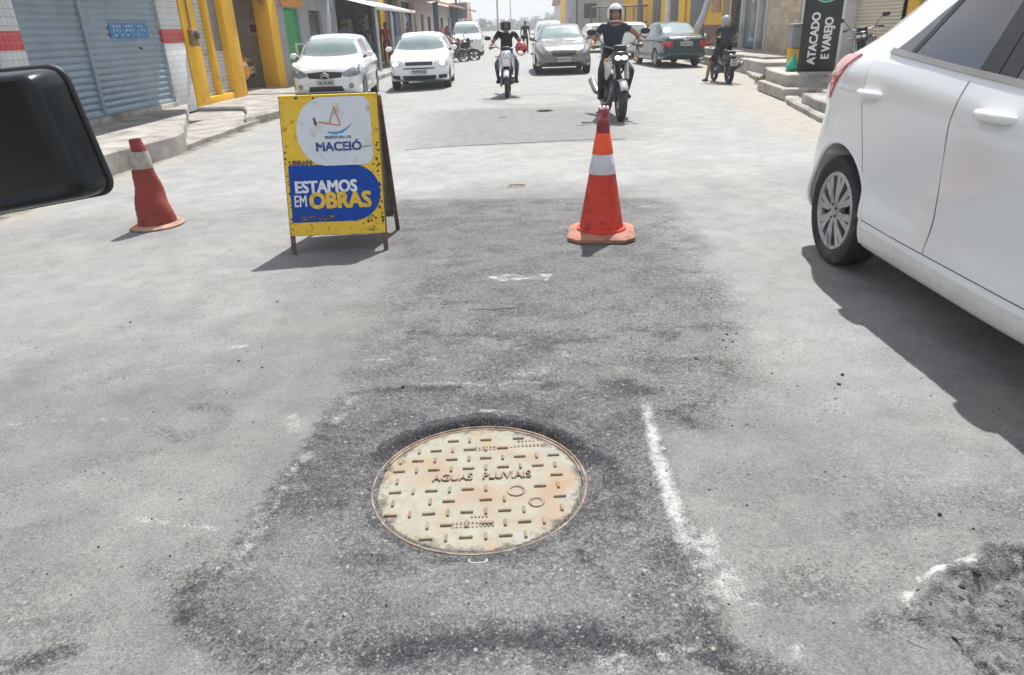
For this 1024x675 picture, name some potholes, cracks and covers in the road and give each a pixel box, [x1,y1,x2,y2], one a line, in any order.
manhole cover [371,426,588,564]
